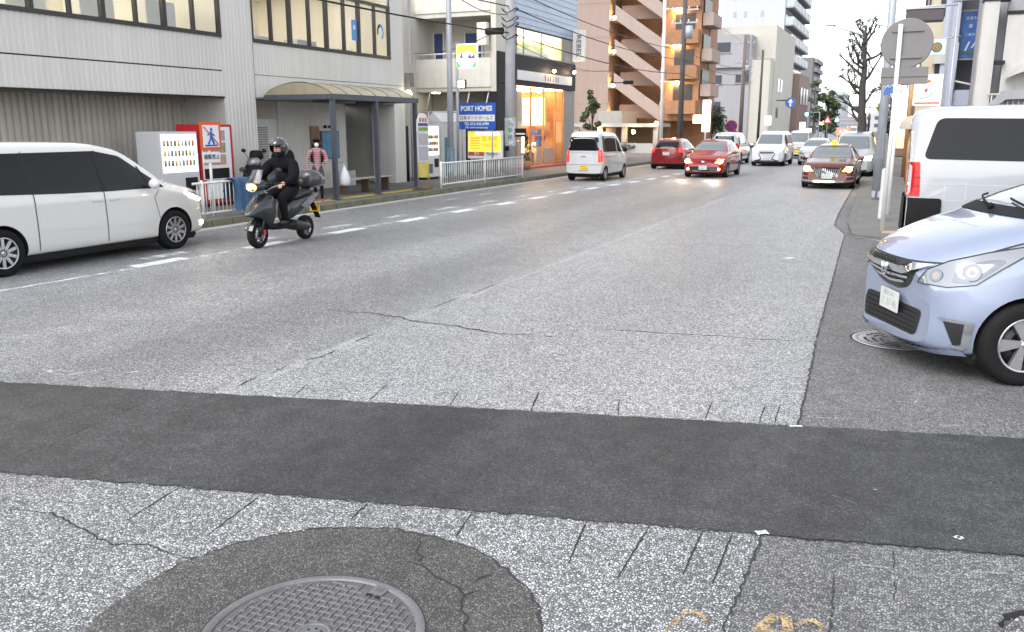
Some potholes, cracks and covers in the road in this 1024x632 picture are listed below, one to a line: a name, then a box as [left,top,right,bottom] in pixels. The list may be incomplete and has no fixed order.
crack [595,329,790,341]
crack [569,521,587,563]
crack [409,540,493,632]
crack [12,488,192,558]
crack [618,526,649,577]
manhole cover [850,330,929,351]
manhole cover [200,575,426,632]
